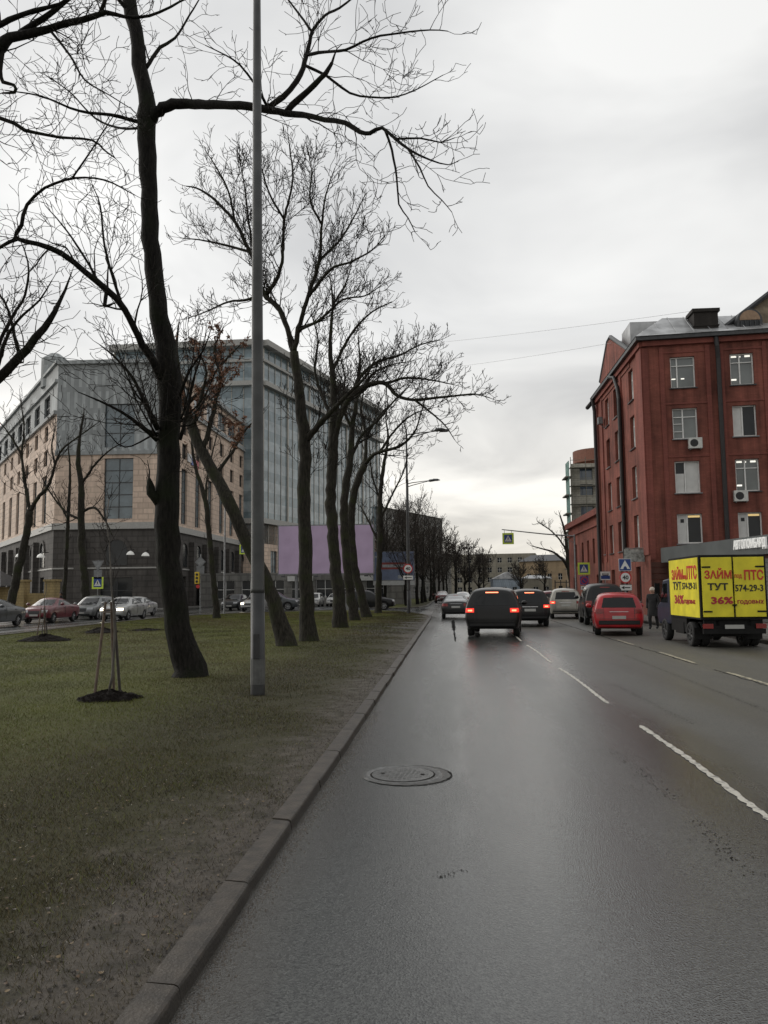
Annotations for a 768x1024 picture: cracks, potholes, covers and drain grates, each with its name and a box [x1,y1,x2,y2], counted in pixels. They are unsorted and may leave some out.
manhole cover [362,765,452,786]
